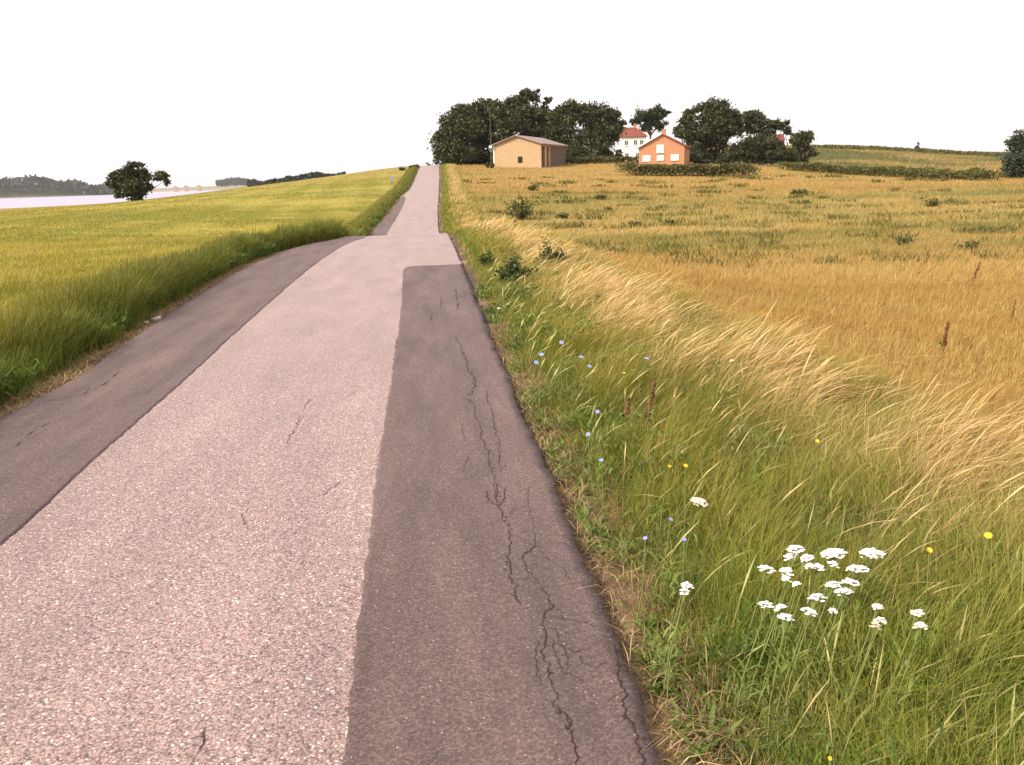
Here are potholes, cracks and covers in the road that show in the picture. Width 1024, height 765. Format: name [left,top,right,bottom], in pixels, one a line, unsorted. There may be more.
crack [615,648,646,765]
crack [454,335,606,765]
